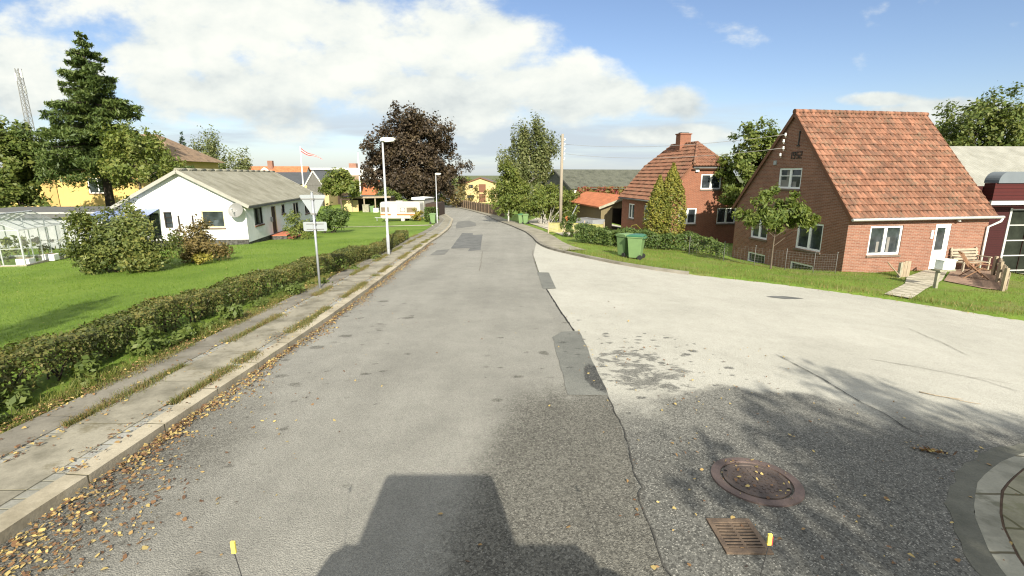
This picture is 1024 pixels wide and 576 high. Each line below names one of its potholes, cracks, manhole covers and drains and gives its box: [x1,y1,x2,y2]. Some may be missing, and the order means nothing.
drain grate [706,518,774,555]
manhole cover [710,457,805,507]
